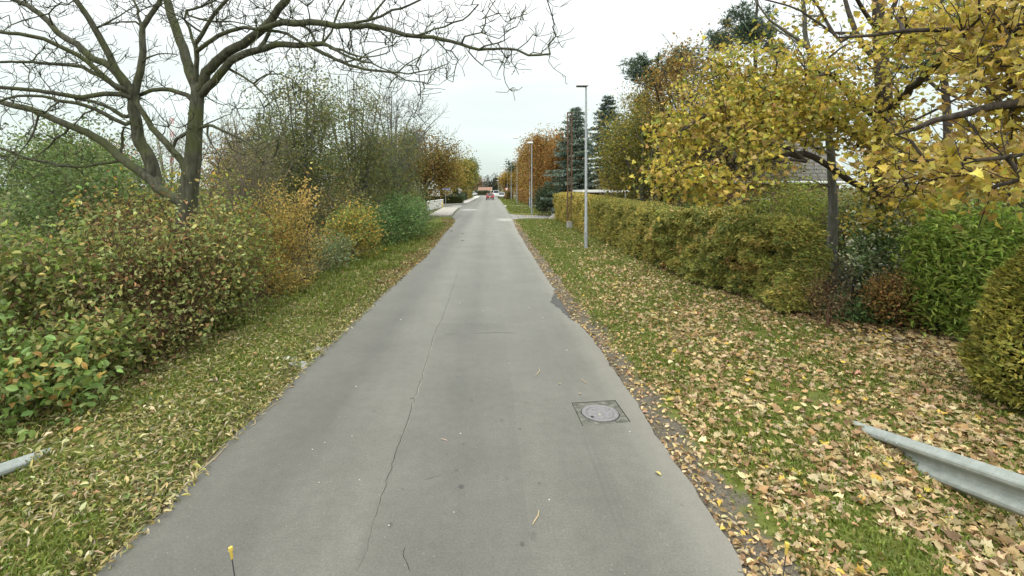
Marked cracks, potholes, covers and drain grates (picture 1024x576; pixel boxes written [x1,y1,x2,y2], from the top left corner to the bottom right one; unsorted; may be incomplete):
manhole cover [572,400,630,426]
crack [357,276,474,570]
